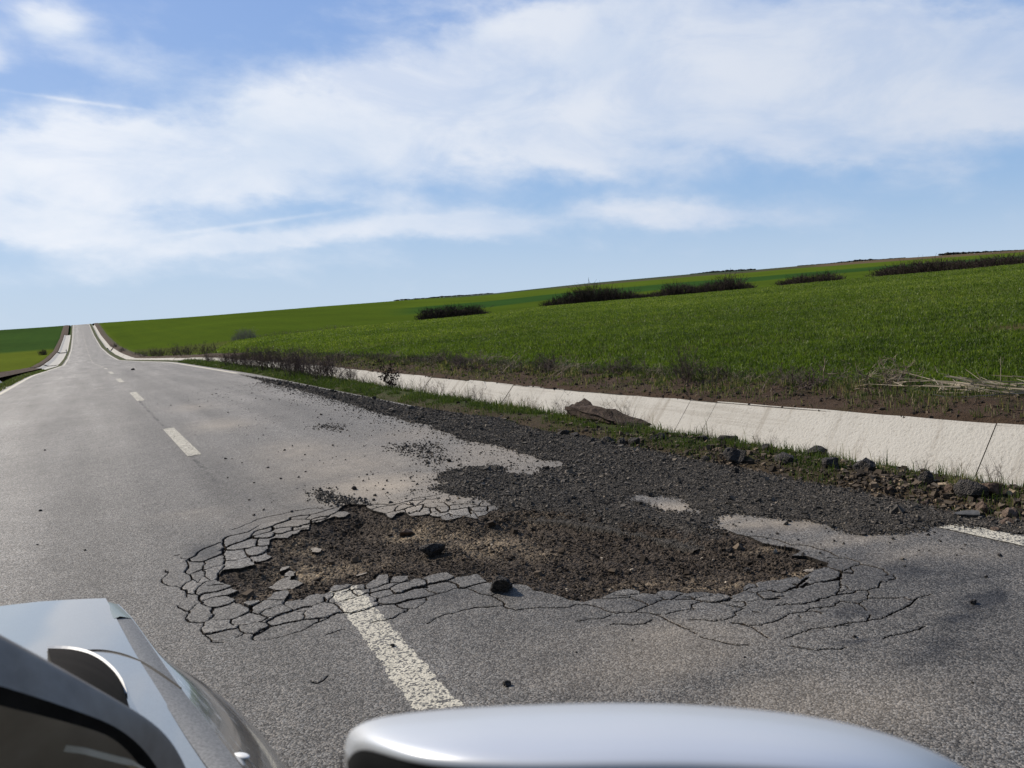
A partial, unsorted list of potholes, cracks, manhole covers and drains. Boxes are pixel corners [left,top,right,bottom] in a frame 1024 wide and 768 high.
crack [161,508,563,643]
pothole [217,504,828,606]
crack [566,536,929,651]
